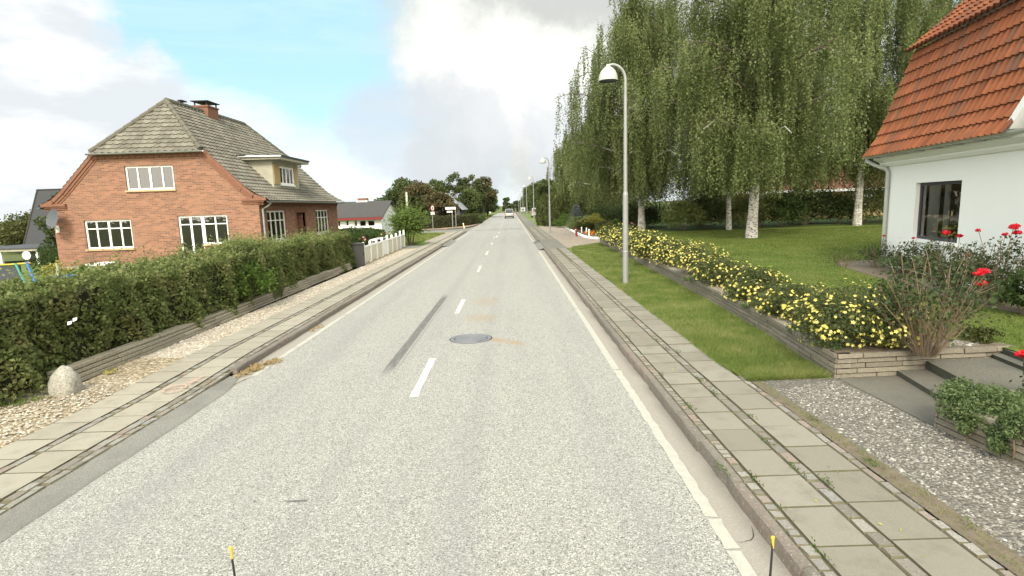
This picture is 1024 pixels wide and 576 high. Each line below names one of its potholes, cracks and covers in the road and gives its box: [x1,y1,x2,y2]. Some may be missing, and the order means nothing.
manhole cover [449,334,492,344]
